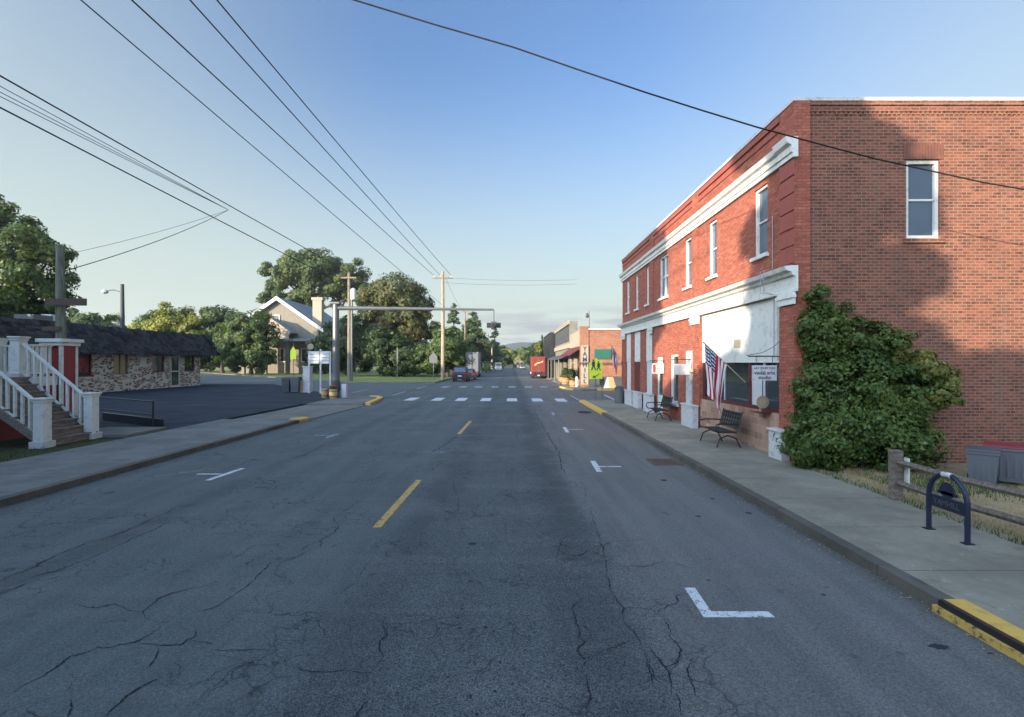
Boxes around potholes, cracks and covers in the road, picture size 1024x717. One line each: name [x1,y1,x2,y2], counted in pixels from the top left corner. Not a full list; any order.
crack [298,619,388,673]
crack [562,591,696,715]
crack [14,496,368,717]
